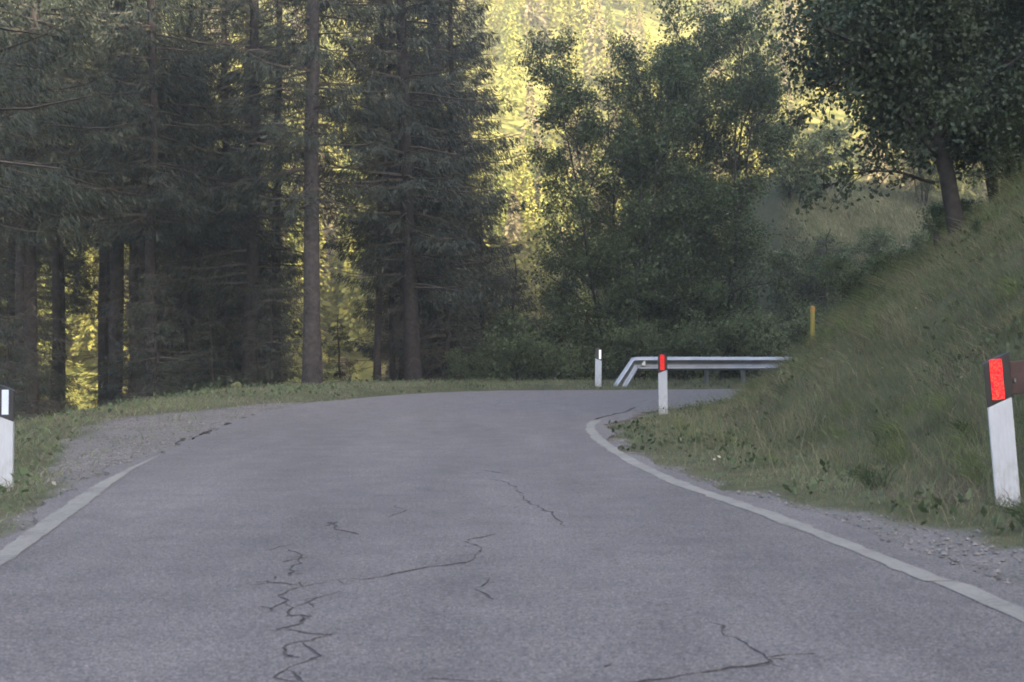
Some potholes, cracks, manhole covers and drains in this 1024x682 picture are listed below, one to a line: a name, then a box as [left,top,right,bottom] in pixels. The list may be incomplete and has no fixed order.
crack [260,535,490,682]
crack [325,522,359,535]
crack [425,622,818,682]
crack [175,417,246,445]
